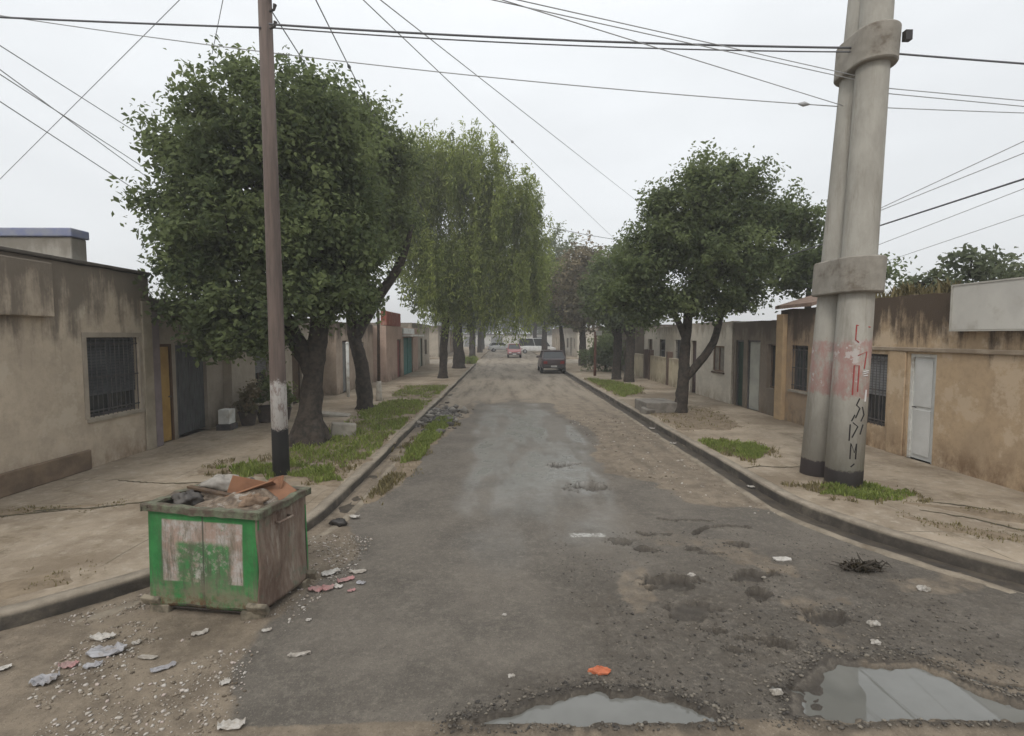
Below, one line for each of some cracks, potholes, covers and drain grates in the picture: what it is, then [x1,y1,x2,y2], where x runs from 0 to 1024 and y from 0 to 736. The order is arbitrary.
pothole [631,572,712,592]
pothole [634,545,659,553]
pothole [794,607,852,627]
pothole [786,656,1024,725]
pothole [728,568,784,583]
pothole [604,537,635,546]
pothole [661,597,725,624]
pothole [561,480,613,493]
pothole [744,586,774,603]
pothole [455,687,719,726]
